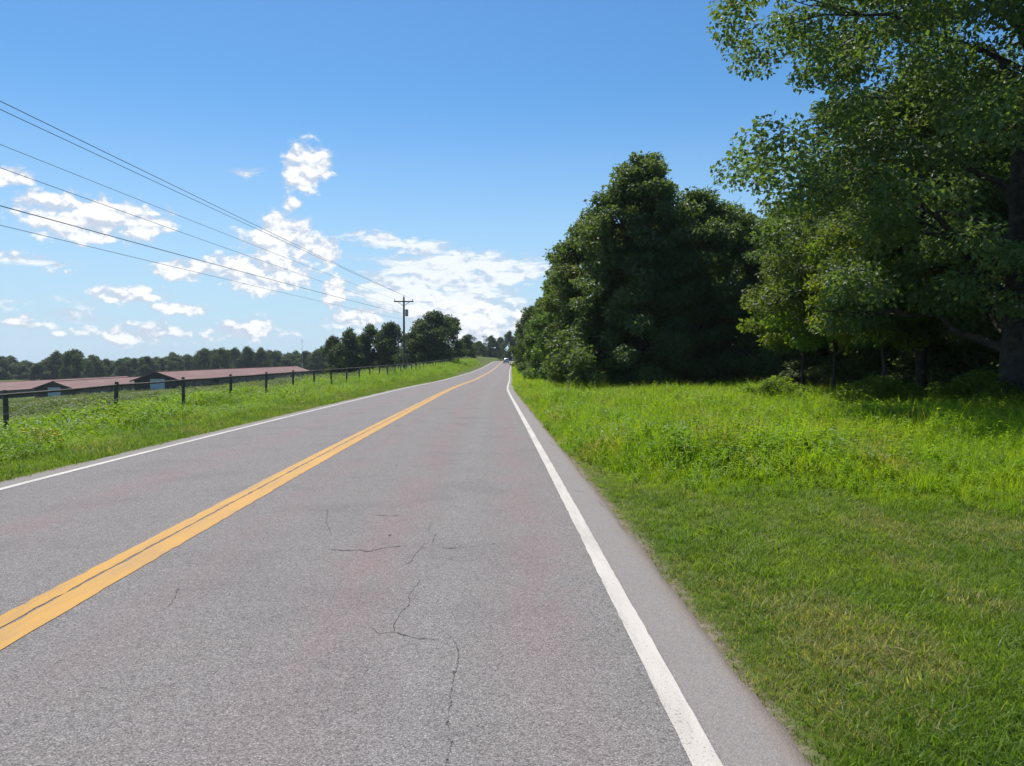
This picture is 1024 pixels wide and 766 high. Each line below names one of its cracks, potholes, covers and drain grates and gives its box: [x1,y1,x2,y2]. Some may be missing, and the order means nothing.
crack [325,511,459,765]
